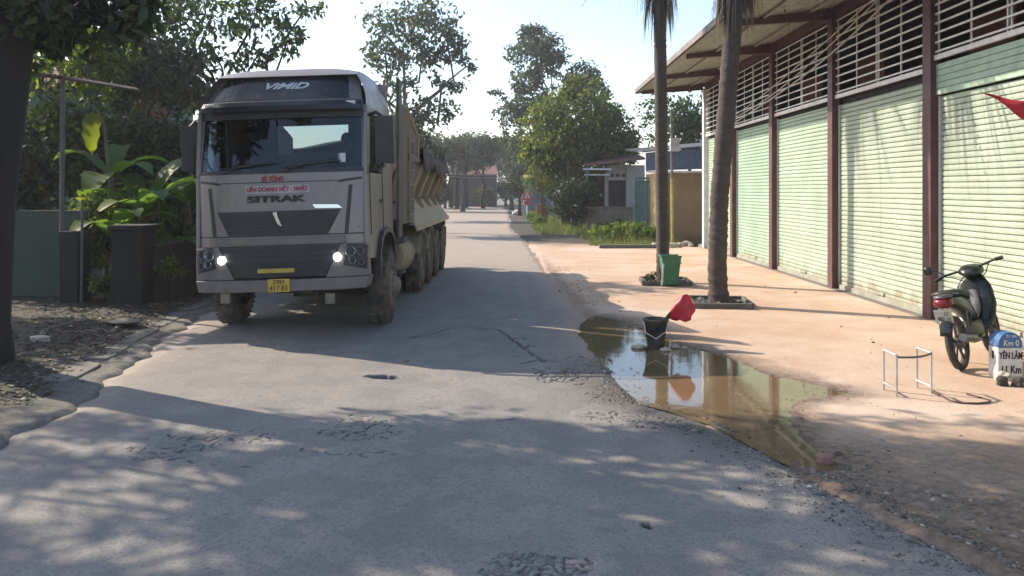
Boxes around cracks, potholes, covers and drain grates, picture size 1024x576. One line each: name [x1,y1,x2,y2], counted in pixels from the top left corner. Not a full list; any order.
crack [397,326,735,443]
pothole [345,373,419,383]
crack [93,410,426,476]
